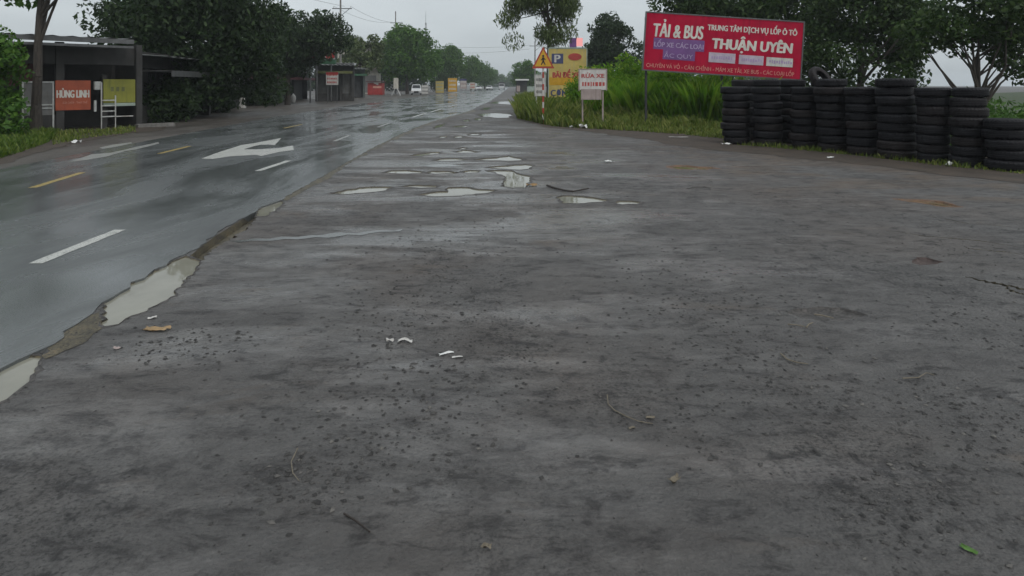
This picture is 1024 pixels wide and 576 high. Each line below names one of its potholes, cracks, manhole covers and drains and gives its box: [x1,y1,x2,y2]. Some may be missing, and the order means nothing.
pothole [98,255,202,329]
pothole [556,195,613,204]
pothole [0,353,44,404]
pothole [254,200,287,218]
crack [965,276,1024,295]
pothole [485,170,536,189]
pothole [329,186,395,195]
pothole [416,187,499,197]
